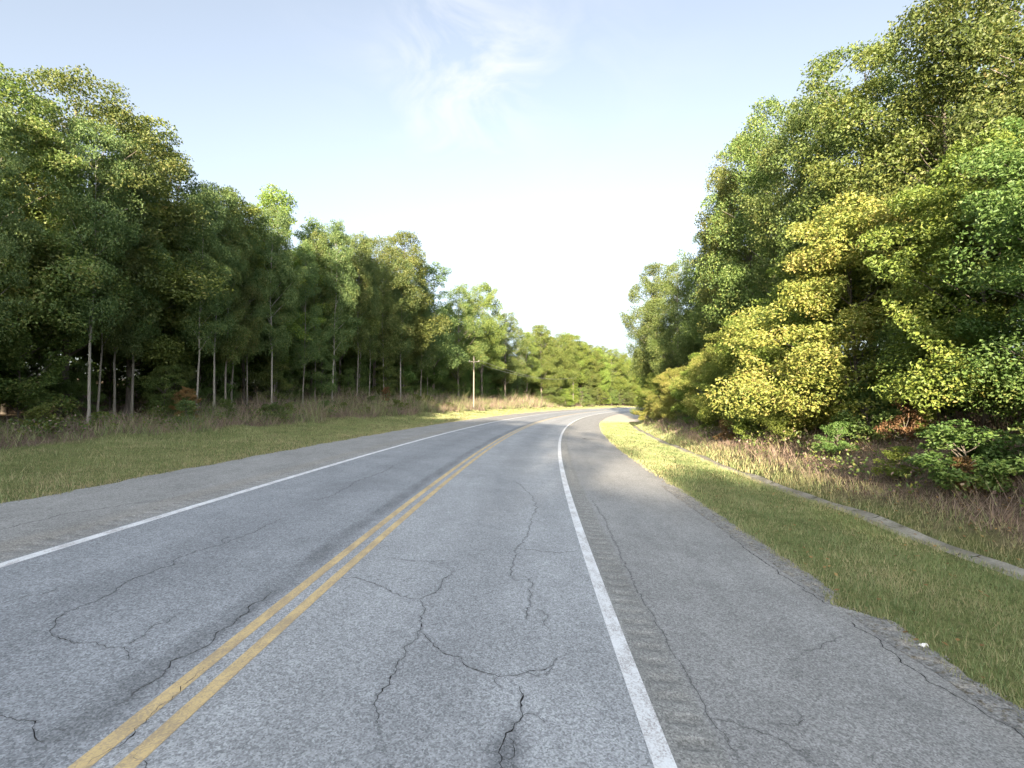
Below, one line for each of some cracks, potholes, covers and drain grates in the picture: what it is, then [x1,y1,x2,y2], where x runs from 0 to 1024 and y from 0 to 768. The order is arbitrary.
crack [359,576,554,768]
crack [853,624,1024,738]
crack [50,519,280,659]
